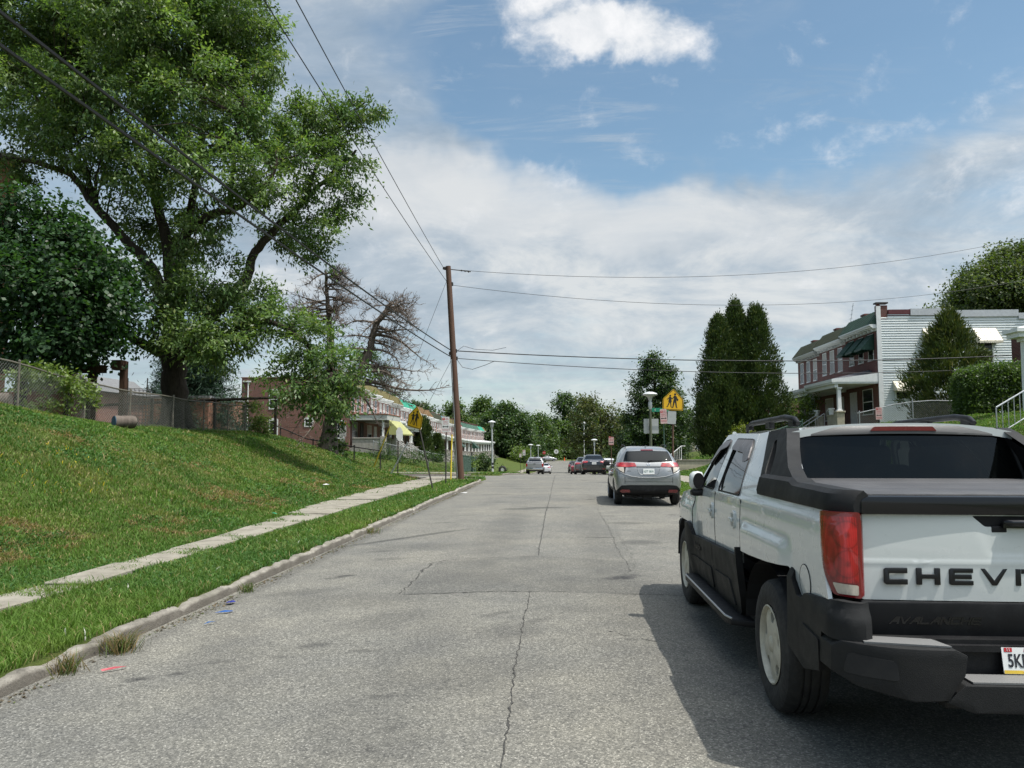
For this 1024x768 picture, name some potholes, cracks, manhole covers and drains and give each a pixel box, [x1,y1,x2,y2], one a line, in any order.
crack [399,556,667,768]
